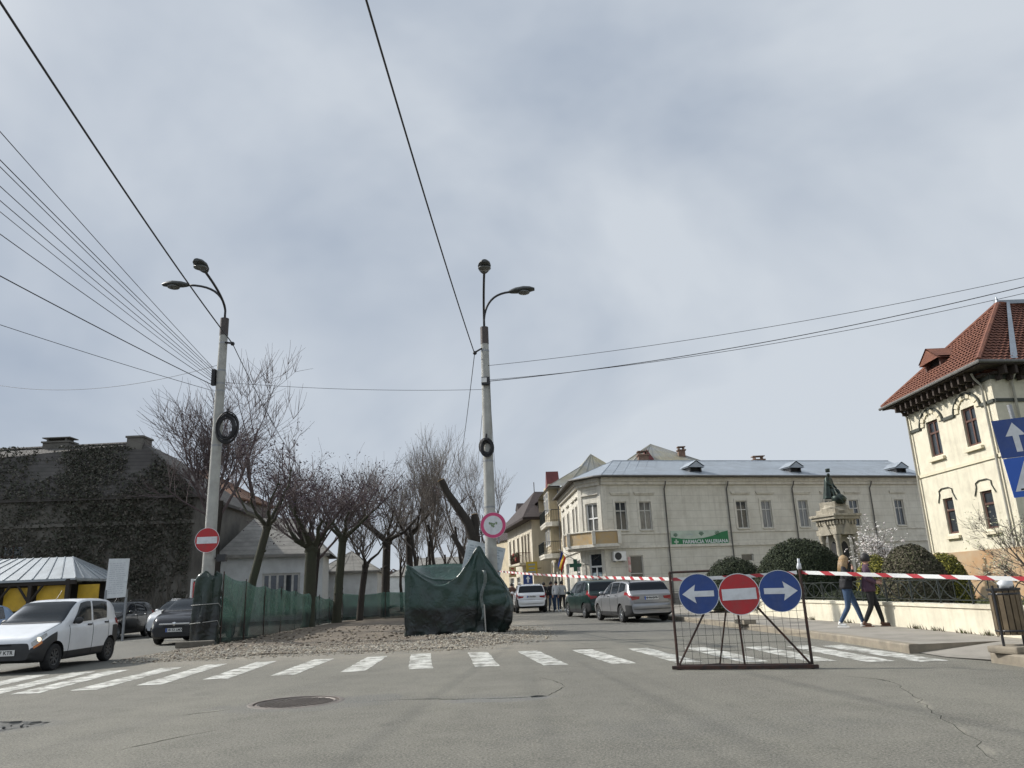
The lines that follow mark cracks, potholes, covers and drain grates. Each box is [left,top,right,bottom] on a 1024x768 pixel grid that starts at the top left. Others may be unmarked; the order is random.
crack [379,679,564,701]
crack [848,676,997,761]
manhole cover [247,695,345,709]
